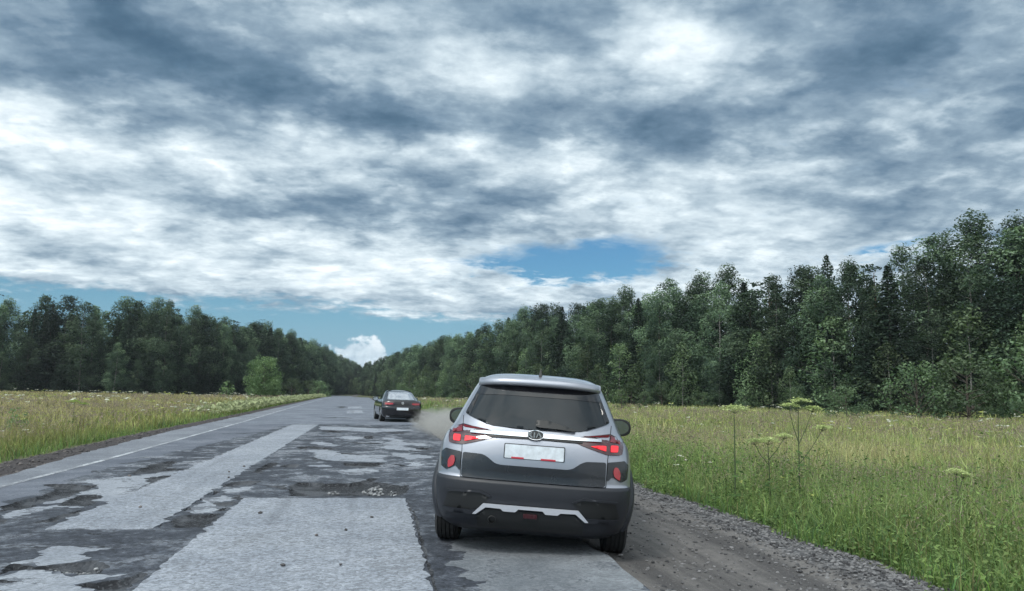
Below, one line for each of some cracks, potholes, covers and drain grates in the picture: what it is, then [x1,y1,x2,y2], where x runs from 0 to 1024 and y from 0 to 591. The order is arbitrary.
pothole [169,514,221,528]
pothole [287,478,409,497]
pothole [0,484,97,512]
pothole [128,461,184,474]
pothole [34,509,82,523]
pothole [0,560,110,575]
